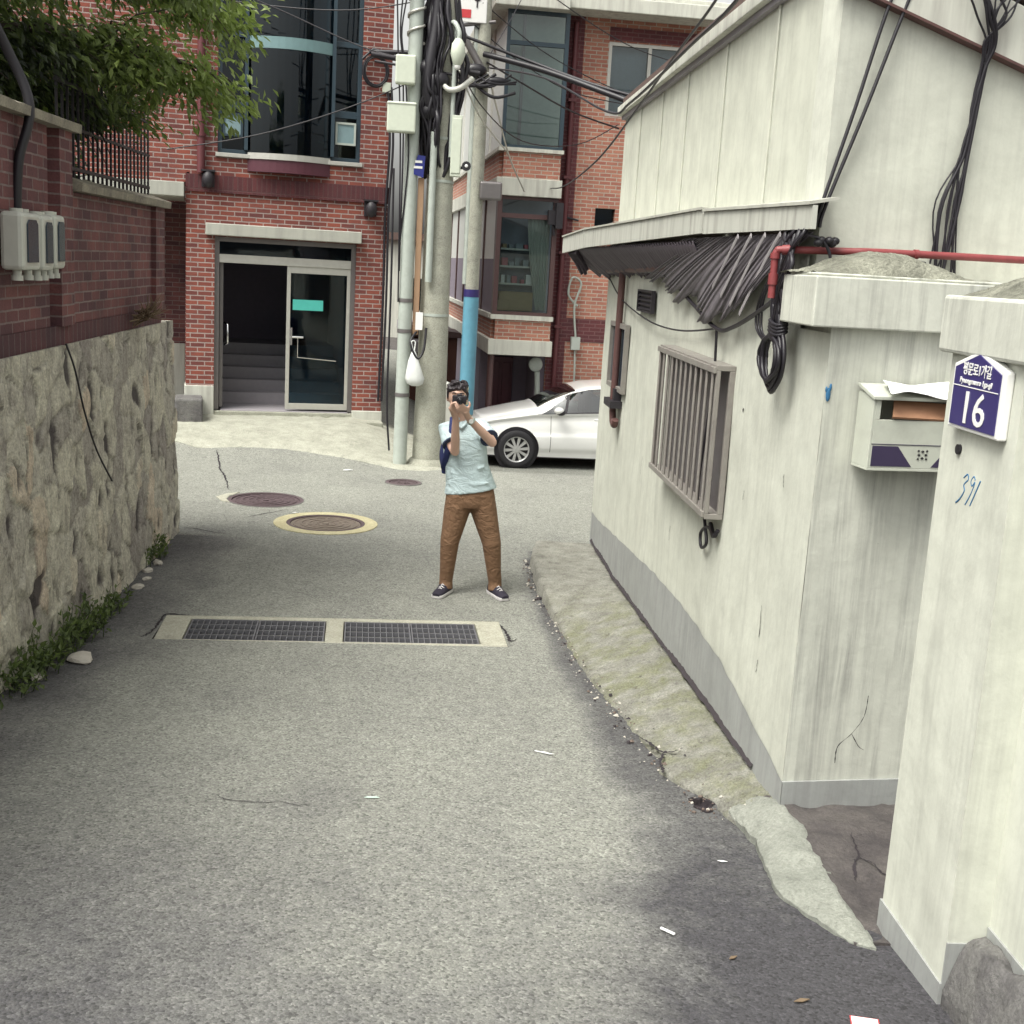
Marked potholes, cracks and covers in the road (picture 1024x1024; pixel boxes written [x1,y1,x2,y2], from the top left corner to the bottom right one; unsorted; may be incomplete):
crack [850,832,886,880]
manhole cover [273,512,377,535]
crack [636,735,682,773]
manhole cover [227,492,304,508]
crack [141,613,195,637]
crack [216,452,228,488]
